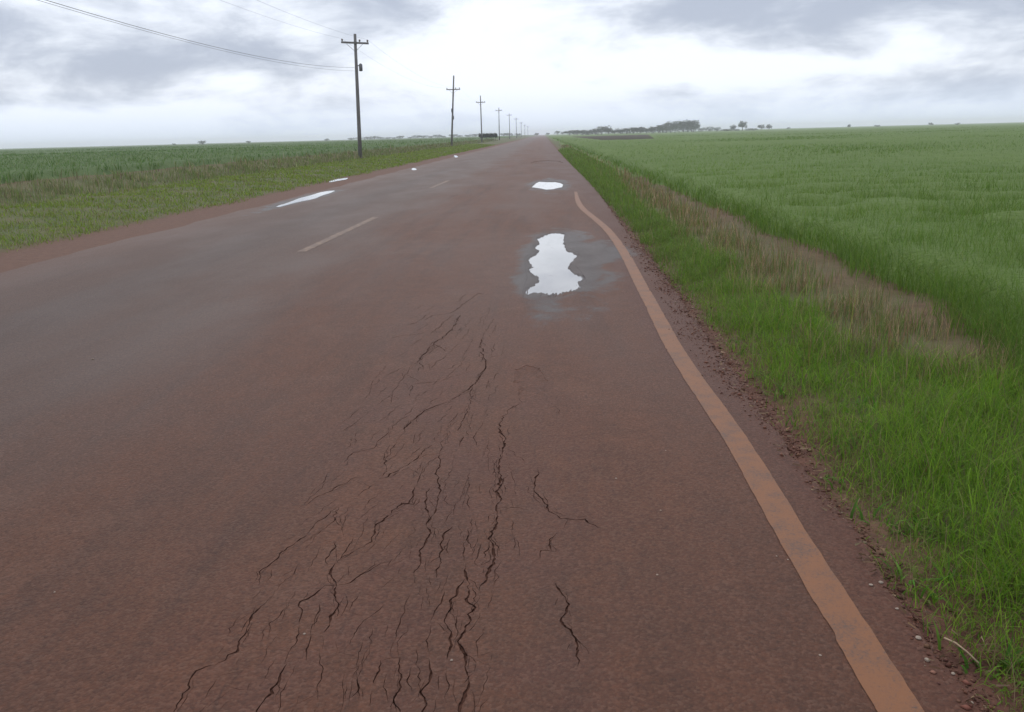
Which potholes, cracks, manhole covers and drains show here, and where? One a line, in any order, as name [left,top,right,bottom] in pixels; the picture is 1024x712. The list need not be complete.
pothole [522,229,587,303]
